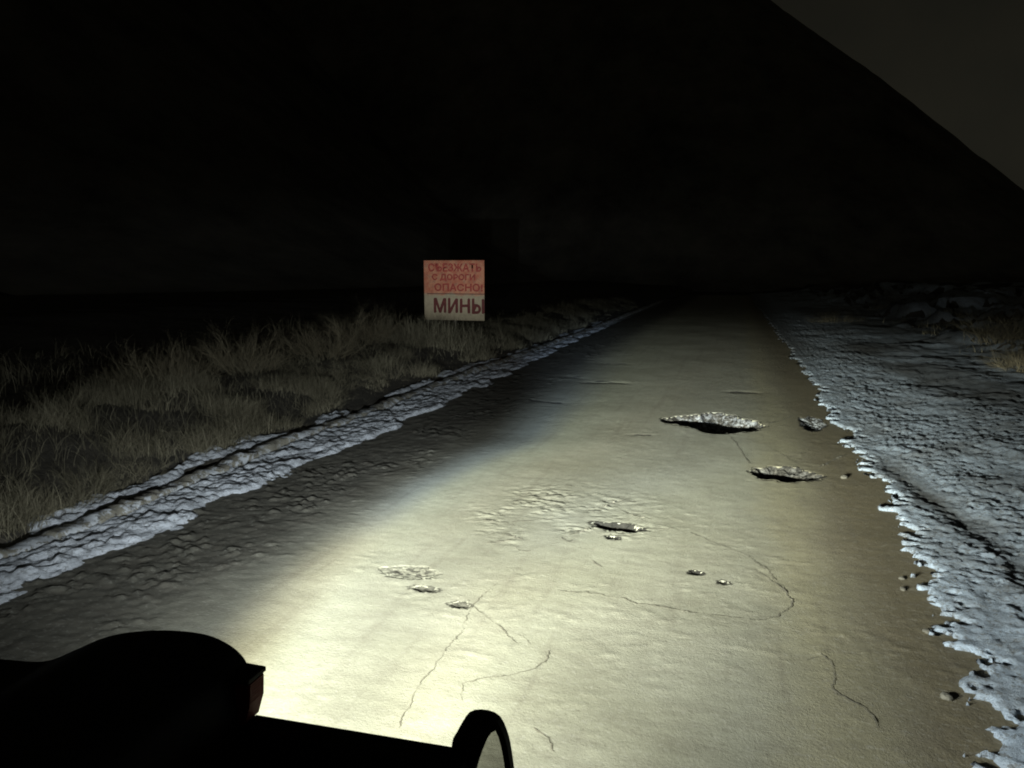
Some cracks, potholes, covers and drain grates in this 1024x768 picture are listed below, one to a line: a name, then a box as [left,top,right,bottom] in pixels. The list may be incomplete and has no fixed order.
pothole [658,412,770,435]
crack [399,583,549,727]
pothole [586,521,651,534]
pothole [745,466,827,484]
crack [806,653,878,727]
crack [483,485,670,567]
pothole [374,565,444,579]
crack [559,532,793,621]
